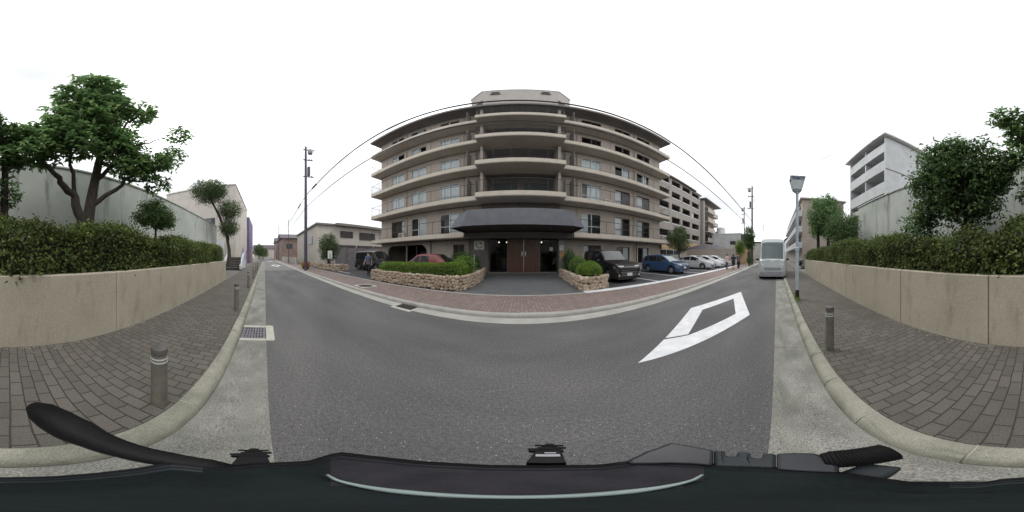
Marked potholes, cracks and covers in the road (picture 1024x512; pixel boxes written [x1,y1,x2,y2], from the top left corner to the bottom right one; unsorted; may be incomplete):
drain grate [239,325,275,341]
drain grate [390,304,418,312]
